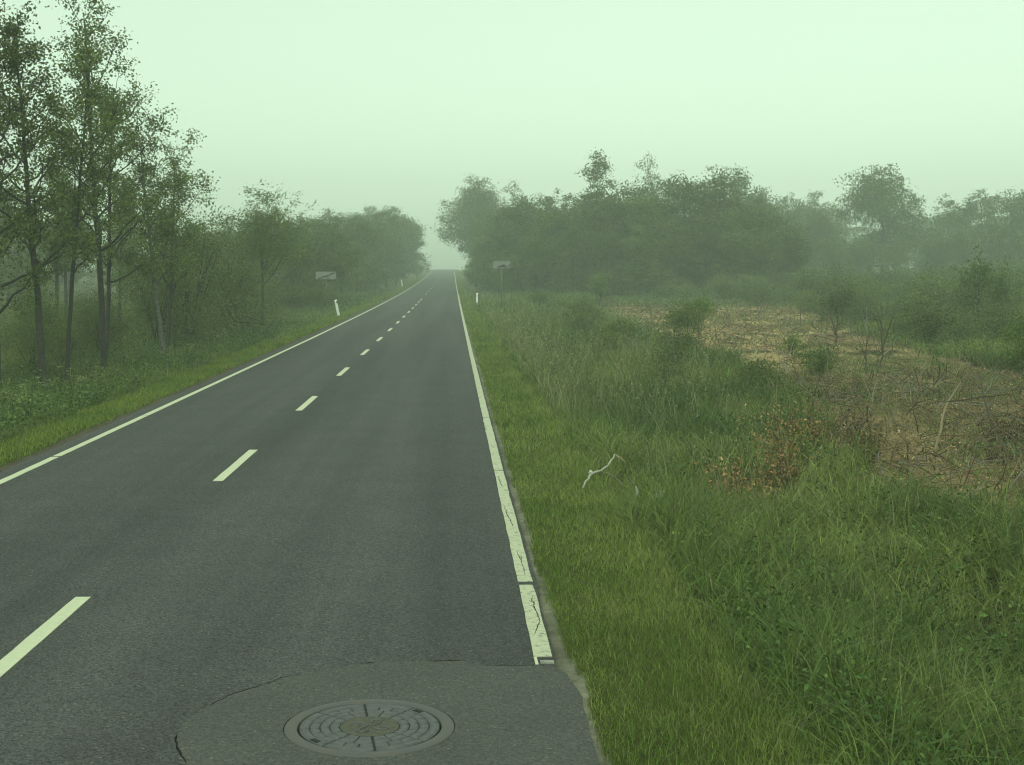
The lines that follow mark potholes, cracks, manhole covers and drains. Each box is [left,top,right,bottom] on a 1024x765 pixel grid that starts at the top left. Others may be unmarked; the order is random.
crack [175,733,186,763]
manhole cover [284,699,455,757]
